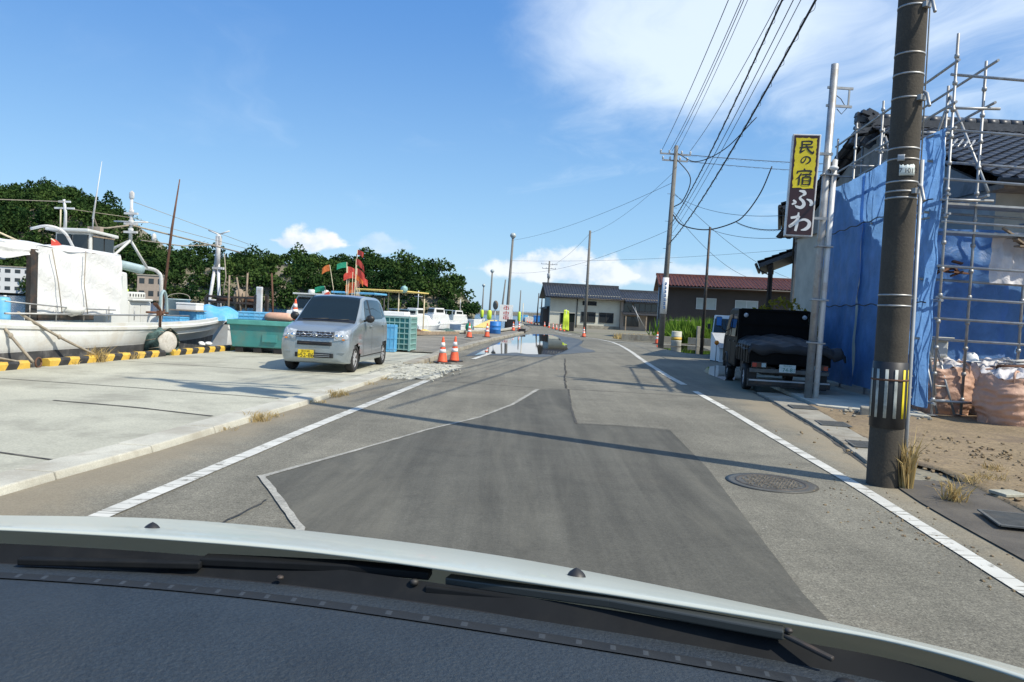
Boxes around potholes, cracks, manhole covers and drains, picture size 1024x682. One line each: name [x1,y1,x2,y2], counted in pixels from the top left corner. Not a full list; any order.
manhole cover [725,473,819,493]
